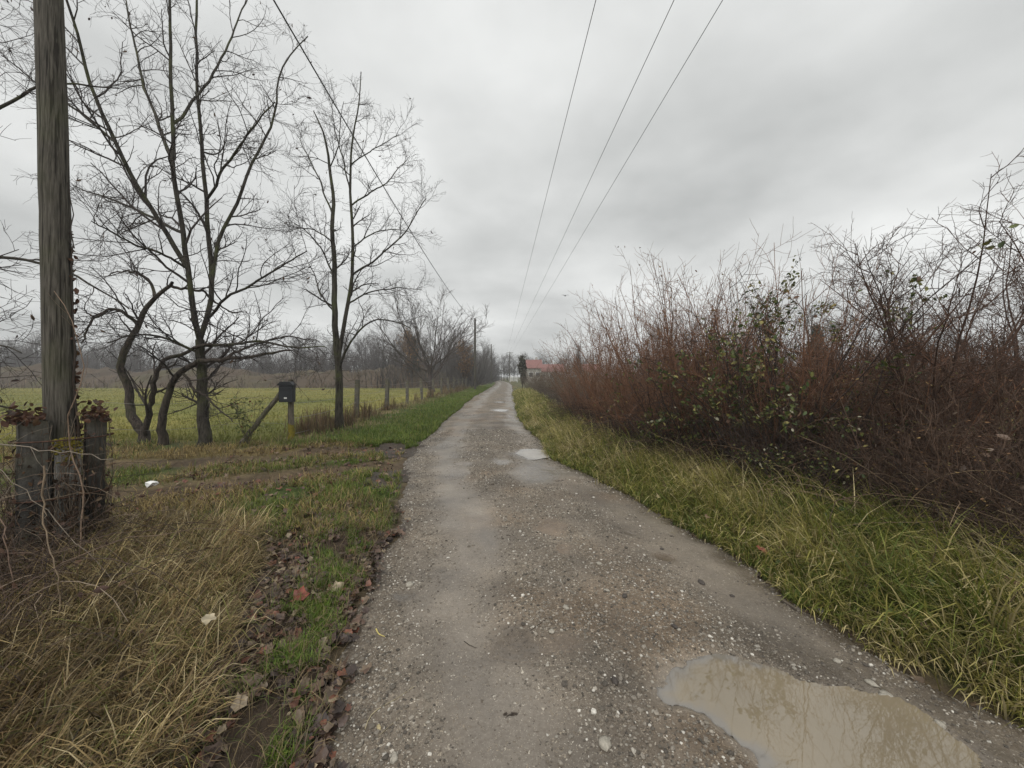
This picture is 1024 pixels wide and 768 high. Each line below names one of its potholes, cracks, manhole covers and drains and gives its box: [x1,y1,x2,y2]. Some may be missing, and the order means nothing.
pothole [650,656,758,765]
